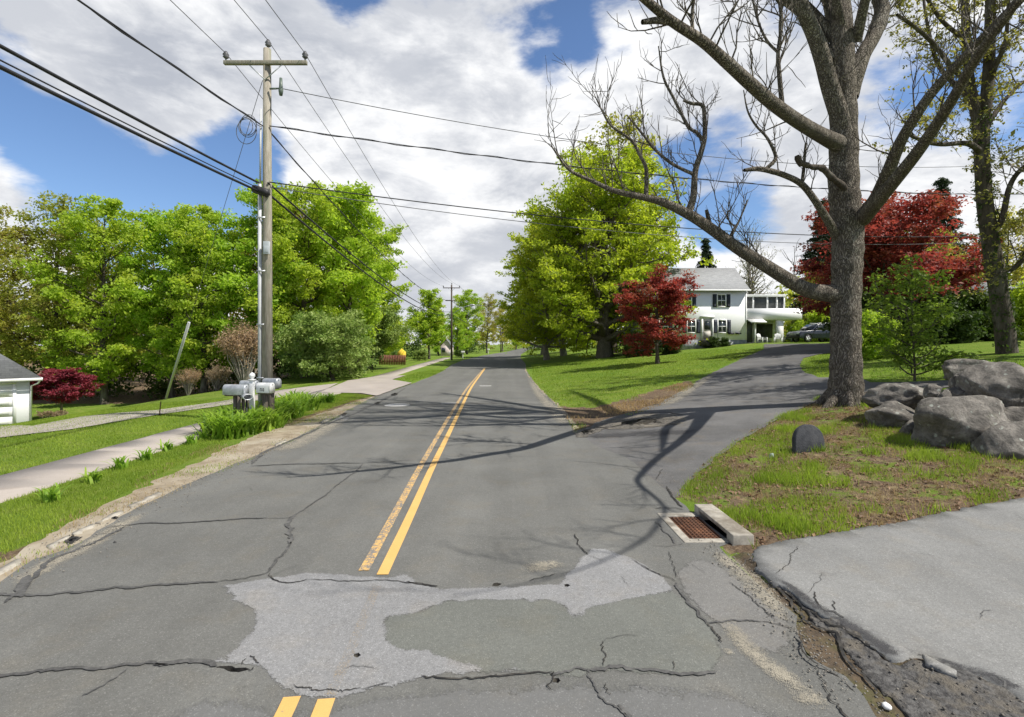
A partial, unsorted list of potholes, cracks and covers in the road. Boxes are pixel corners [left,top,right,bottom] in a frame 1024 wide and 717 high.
crack [707,548,889,717]
crack [253,460,403,518]
crack [84,667,128,694]
crack [587,634,716,717]
crack [221,542,306,583]
drain grate [657,504,754,546]
